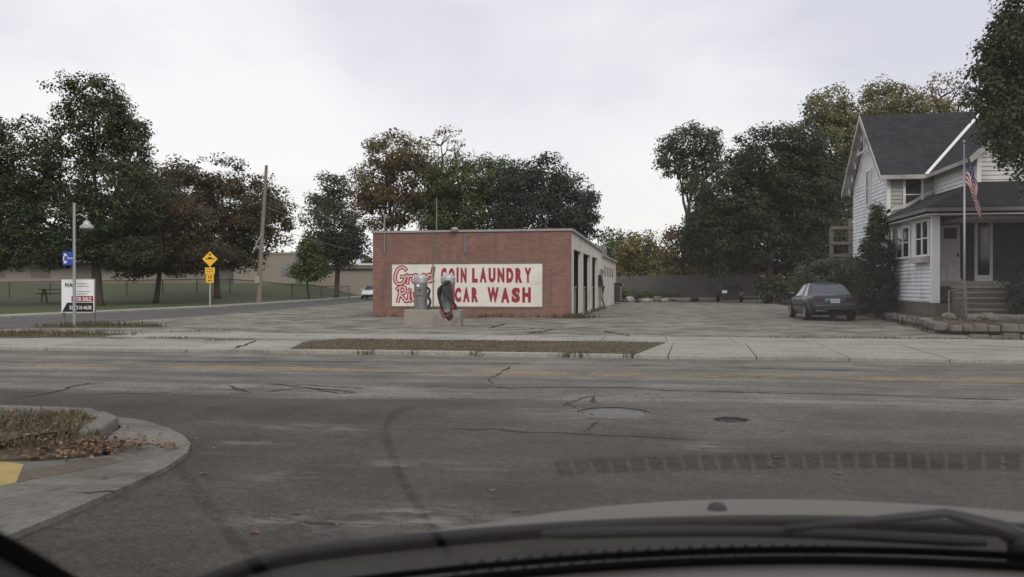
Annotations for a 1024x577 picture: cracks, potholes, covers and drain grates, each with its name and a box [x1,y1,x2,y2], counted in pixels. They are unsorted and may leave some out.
crack [441,395,690,440]
crack [227,383,358,394]
manhole cover [578,408,650,418]
crack [15,381,107,399]
